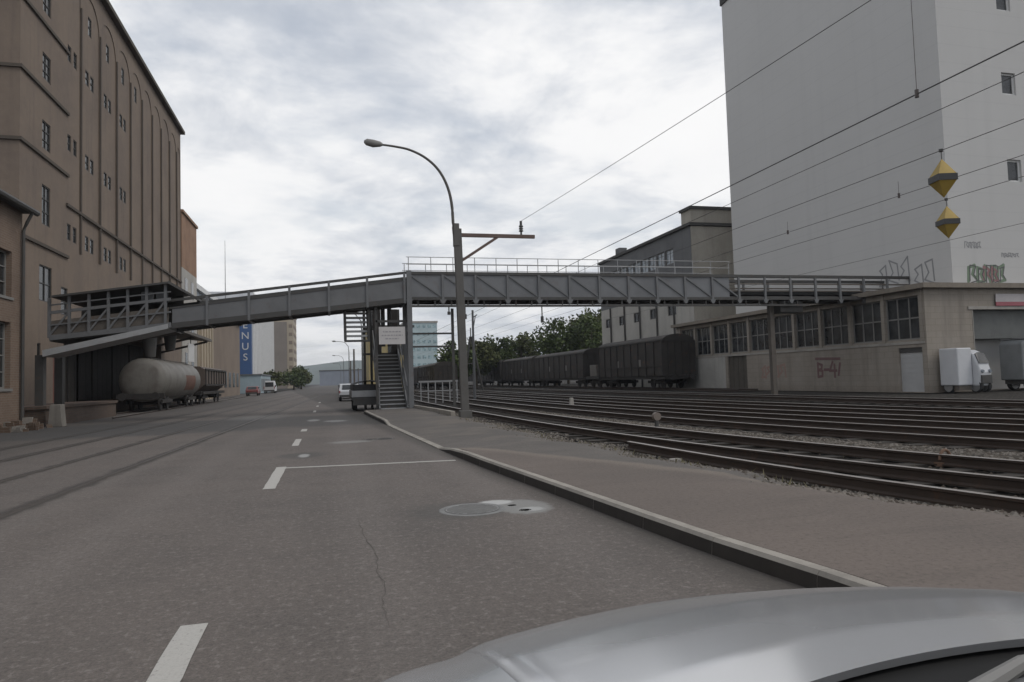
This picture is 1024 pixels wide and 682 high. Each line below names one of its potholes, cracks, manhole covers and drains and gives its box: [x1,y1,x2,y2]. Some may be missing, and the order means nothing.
crack [358,518,395,632]
manhole cover [439,503,506,516]
